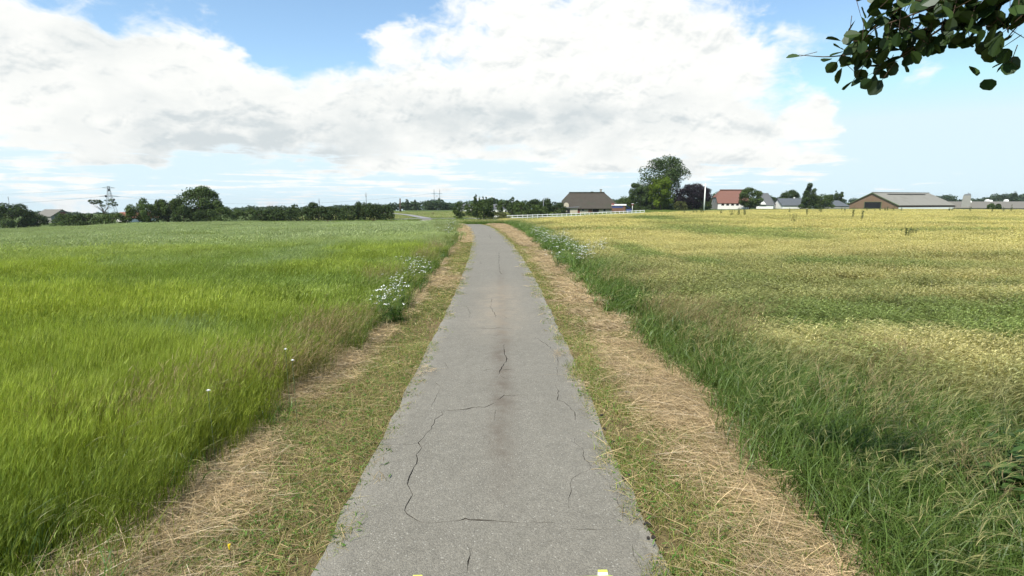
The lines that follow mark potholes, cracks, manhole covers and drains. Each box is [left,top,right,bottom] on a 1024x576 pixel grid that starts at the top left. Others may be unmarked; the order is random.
crack [394,383,555,523]
